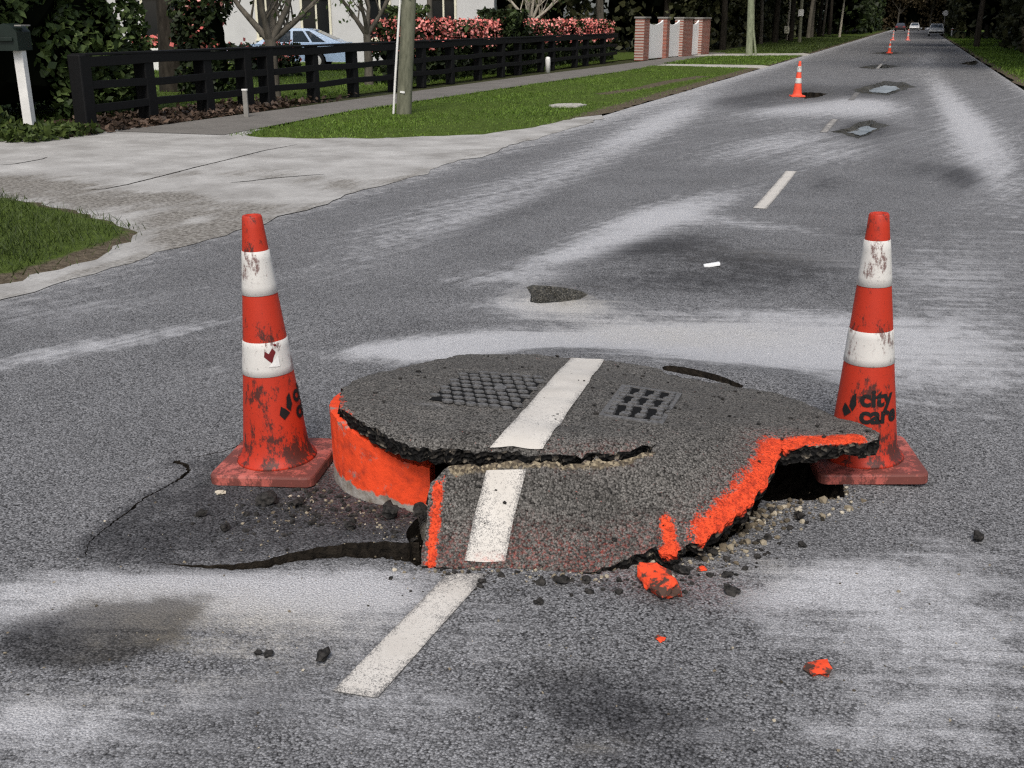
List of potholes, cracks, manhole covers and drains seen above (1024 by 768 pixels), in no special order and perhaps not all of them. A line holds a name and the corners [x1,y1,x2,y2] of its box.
pothole [406,374,845,565]
drain grate [599,384,682,426]
crack [157,541,419,571]
pothole [831,120,890,139]
crack [85,445,238,555]
pothole [854,81,914,95]
manhole cover [429,371,545,411]
